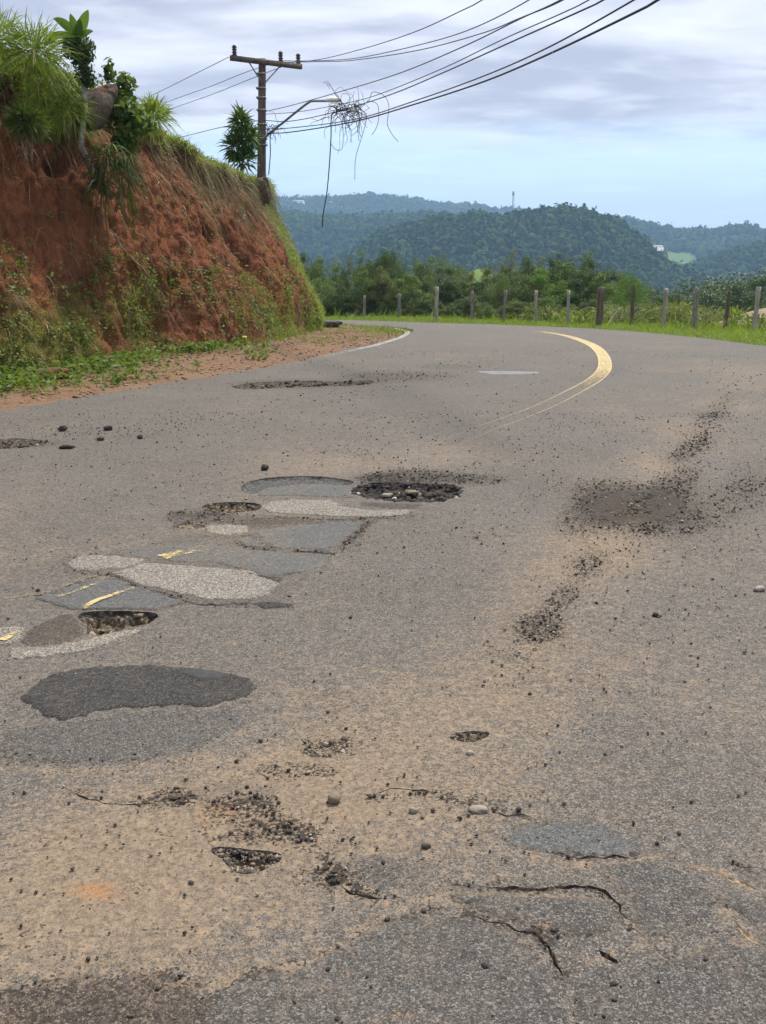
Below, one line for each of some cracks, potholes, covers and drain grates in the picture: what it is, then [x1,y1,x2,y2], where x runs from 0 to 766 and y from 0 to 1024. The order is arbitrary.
pothole [77,611,158,636]
crack [449,883,626,985]
pothole [232,379,374,389]
pothole [351,481,464,503]
pothole [211,847,282,874]
pothole [202,502,261,513]
pothole [588,487,684,524]
pothole [450,731,490,742]
pothole [0,438,48,449]
crack [76,793,163,805]
